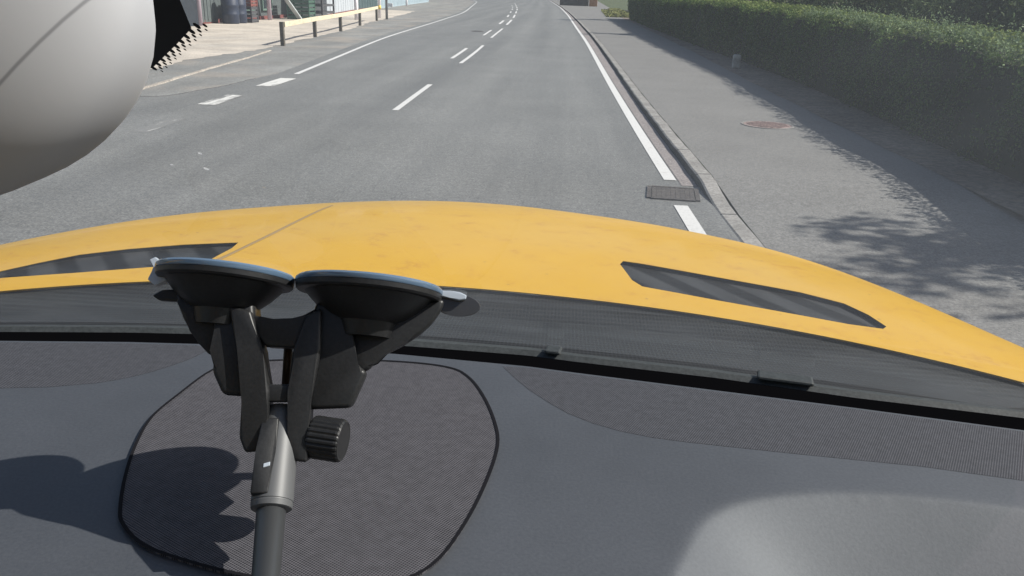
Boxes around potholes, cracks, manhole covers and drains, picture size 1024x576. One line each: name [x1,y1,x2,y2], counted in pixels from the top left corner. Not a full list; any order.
manhole cover [741,121,794,129]
drain grate [646,185,700,202]
